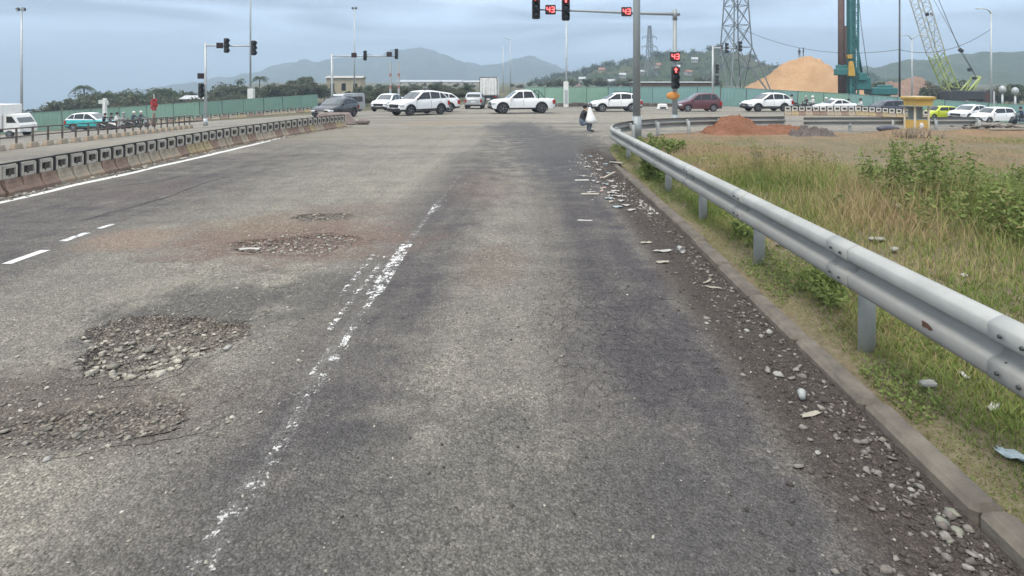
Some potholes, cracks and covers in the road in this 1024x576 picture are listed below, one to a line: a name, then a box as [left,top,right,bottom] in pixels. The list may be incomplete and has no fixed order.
pothole [0,392,229,458]
pothole [213,231,377,256]
pothole [280,211,363,223]
pothole [57,310,269,388]
